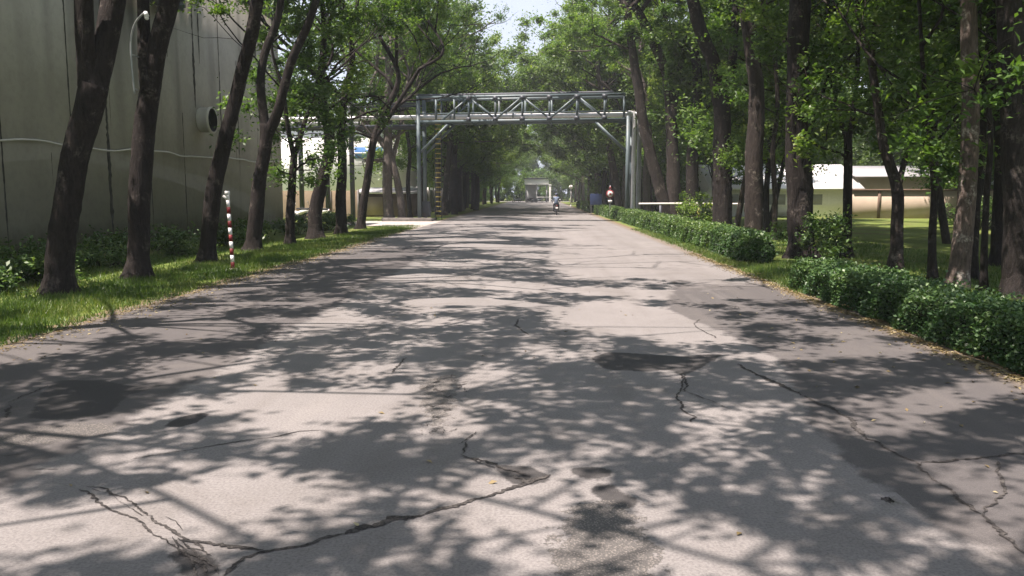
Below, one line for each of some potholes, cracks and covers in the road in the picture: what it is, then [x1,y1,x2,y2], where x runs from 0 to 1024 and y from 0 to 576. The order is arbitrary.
crack [675,364,1024,552]
